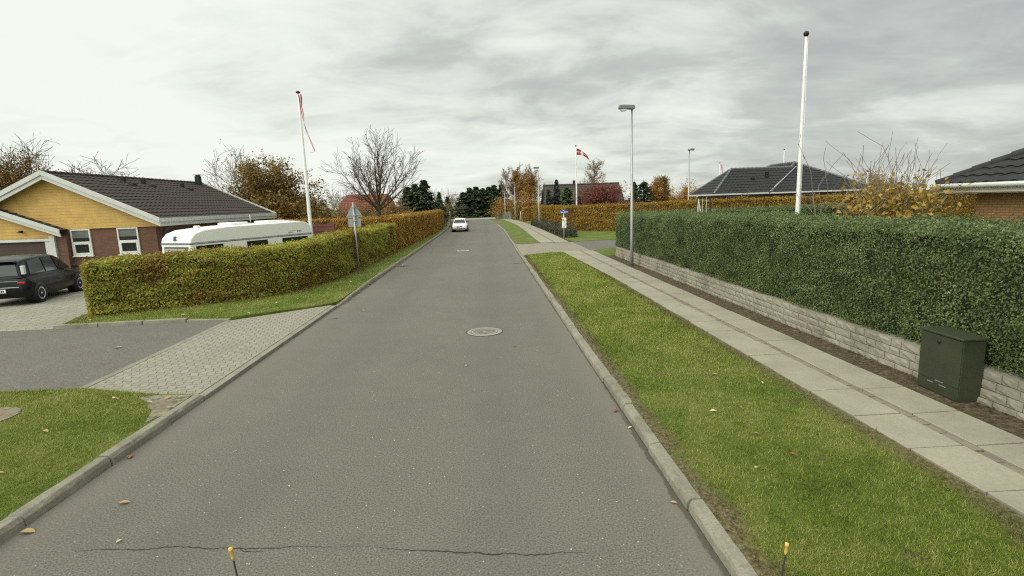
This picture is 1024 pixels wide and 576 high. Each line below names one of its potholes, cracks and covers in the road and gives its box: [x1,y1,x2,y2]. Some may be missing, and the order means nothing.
crack [79,546,593,556]
manhole cover [466,327,503,336]
